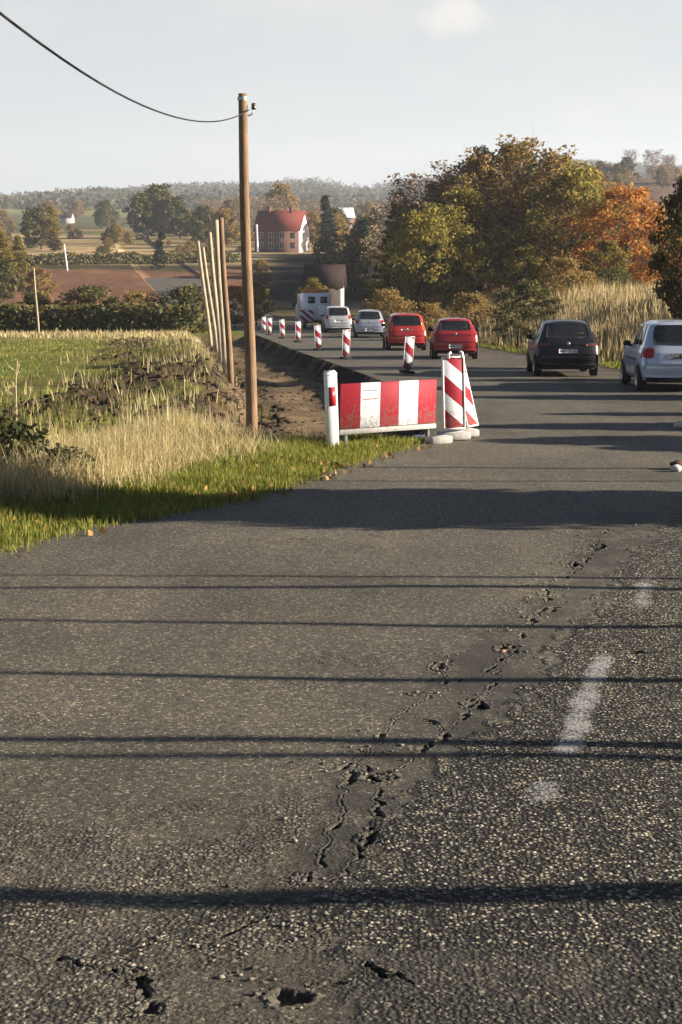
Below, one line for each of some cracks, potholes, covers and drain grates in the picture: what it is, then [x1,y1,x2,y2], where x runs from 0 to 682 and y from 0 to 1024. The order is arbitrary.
pothole [260,985,323,1011]
crack [11,524,613,1022]
pothole [132,998,173,1022]
